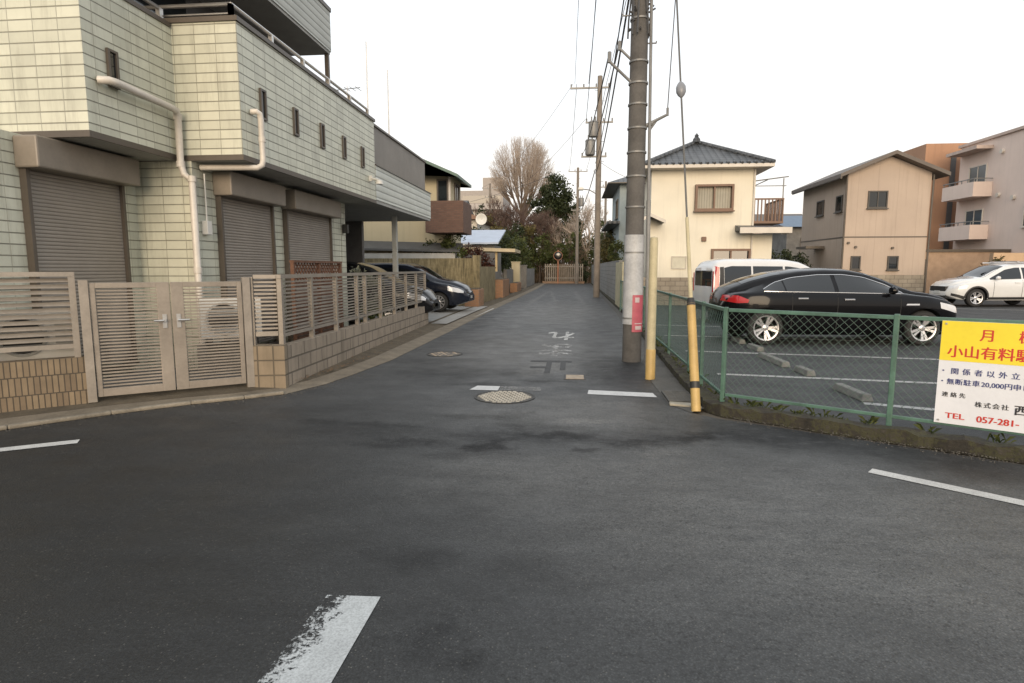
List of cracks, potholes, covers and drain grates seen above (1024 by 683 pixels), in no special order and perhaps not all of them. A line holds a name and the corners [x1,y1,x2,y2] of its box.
manhole cover [474,390,535,404]
